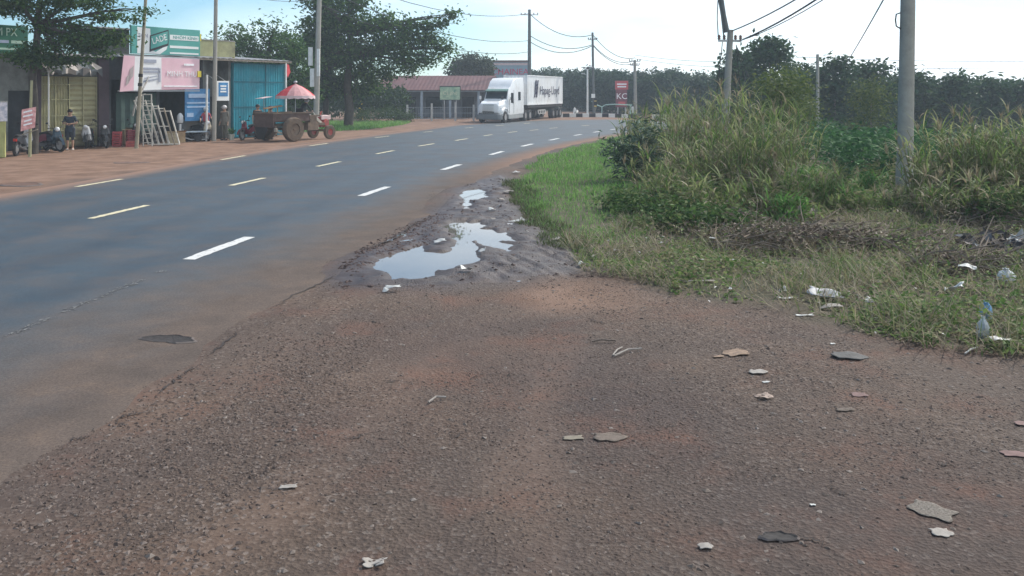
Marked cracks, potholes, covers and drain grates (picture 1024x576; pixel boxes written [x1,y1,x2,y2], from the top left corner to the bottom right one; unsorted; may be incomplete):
pothole [334,175,593,287]
crack [159,331,239,393]
